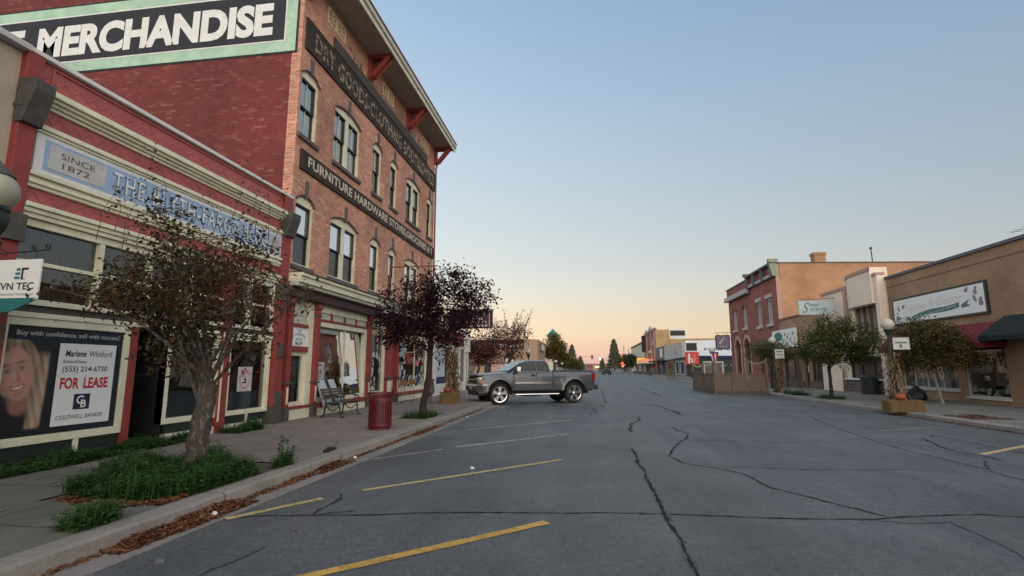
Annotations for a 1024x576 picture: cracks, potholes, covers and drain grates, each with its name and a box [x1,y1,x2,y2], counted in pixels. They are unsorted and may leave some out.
crack [238,390,1024,576]
